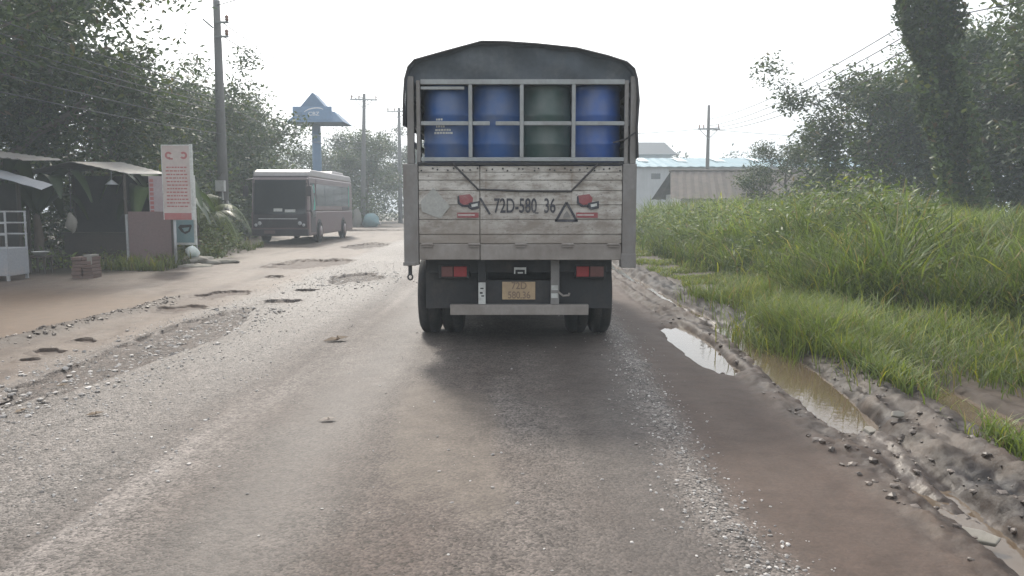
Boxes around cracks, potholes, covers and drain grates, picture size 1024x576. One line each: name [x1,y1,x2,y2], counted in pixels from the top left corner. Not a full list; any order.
pothole [188,290,258,300]
pothole [332,242,398,250]
pothole [322,272,392,286]
pothole [252,258,363,271]
